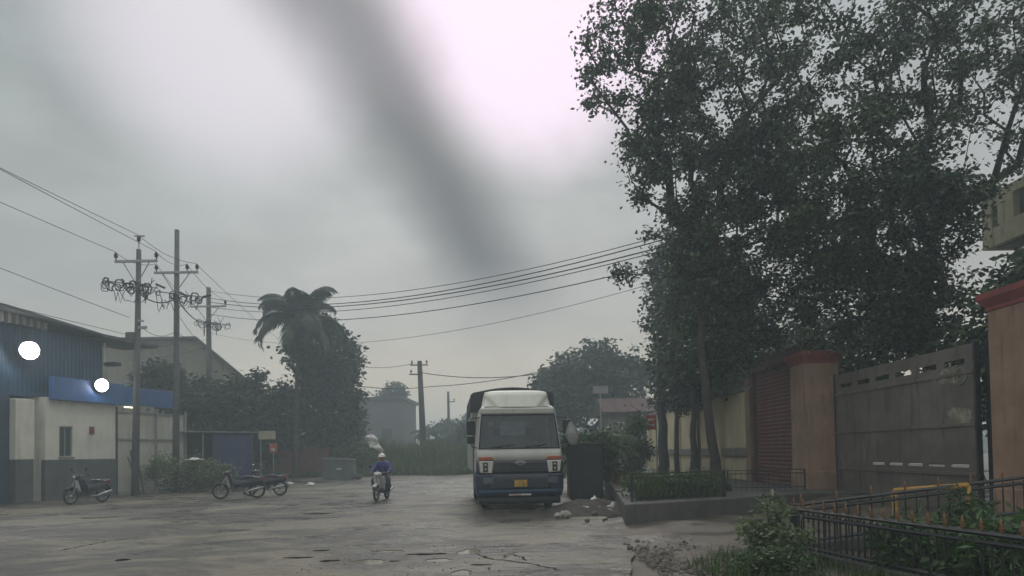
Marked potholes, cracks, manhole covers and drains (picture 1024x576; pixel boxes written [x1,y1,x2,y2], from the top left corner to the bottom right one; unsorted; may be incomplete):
crack [477,545,562,571]
